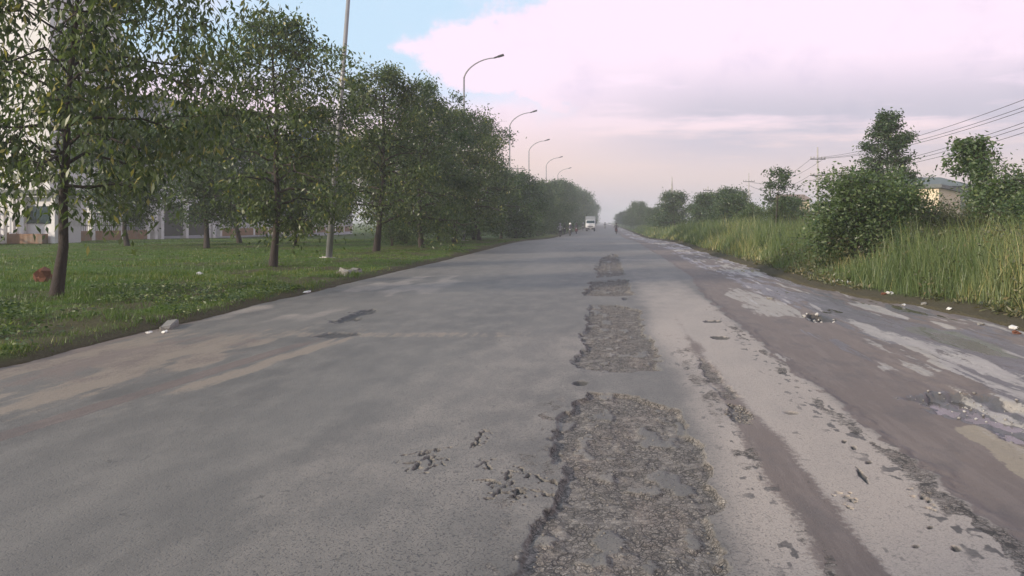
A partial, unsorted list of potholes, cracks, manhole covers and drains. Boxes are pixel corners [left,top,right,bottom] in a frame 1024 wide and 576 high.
pothole [593,253,627,278]
pothole [896,390,1024,445]
pothole [568,304,665,373]
pothole [506,391,736,576]
pothole [721,402,756,425]
pothole [581,279,637,297]
